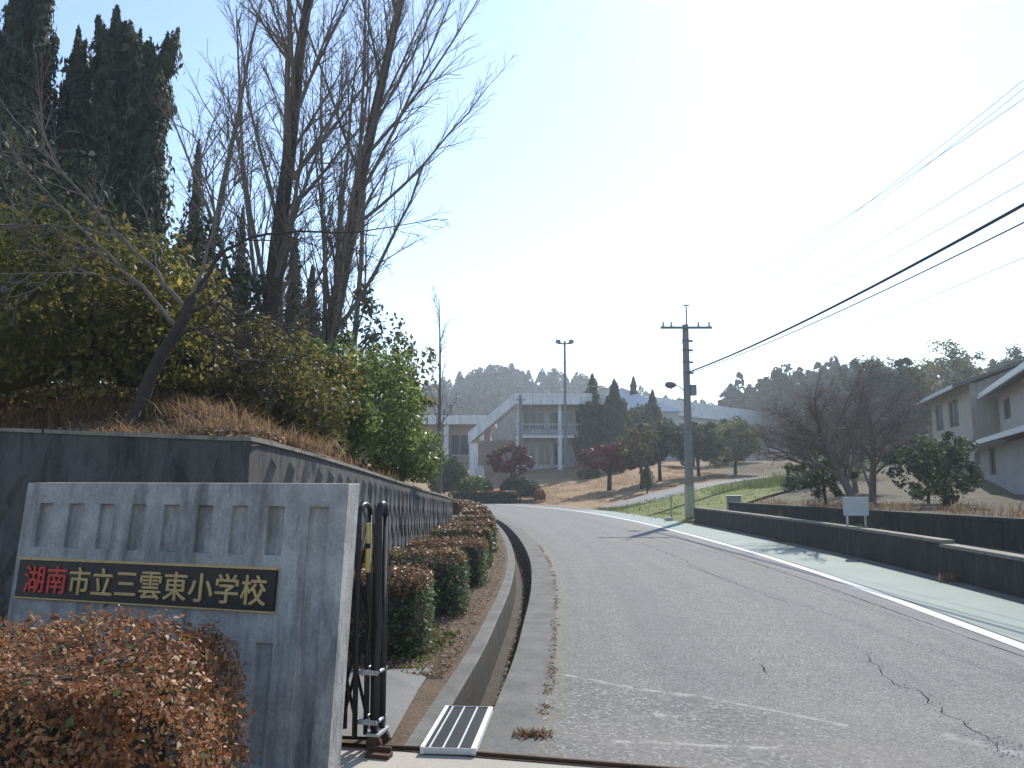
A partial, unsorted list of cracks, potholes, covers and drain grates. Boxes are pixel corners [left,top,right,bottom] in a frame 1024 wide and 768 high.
crack [867,652,1024,759]
drain grate [420,705,493,756]
